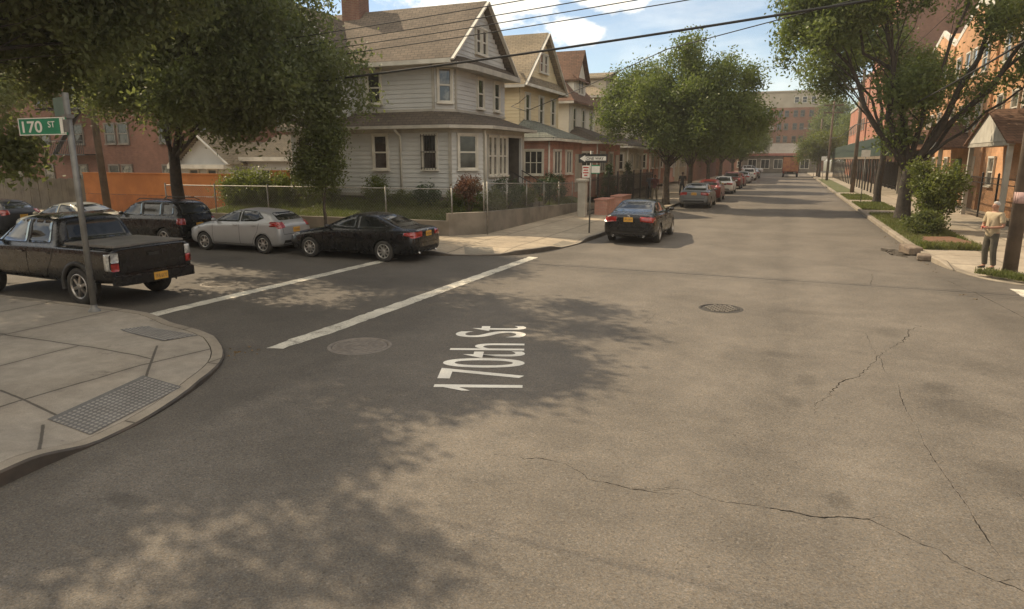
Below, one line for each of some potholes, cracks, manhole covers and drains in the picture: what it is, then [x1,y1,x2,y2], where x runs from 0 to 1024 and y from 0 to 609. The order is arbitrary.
manhole cover [327,337,392,355]
crack [527,458,1024,592]
manhole cover [699,304,743,313]
crack [815,325,996,551]
